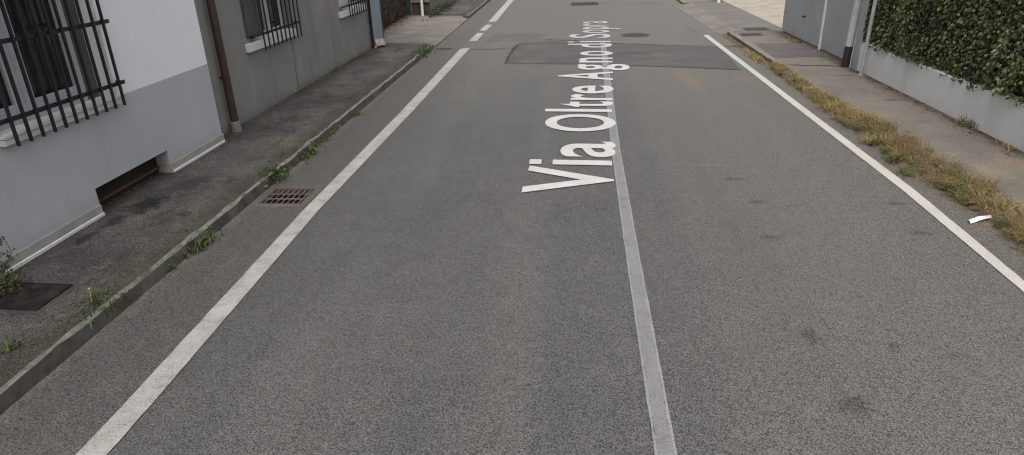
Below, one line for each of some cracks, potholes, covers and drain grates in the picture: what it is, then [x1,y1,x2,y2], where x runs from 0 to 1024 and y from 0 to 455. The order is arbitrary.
drain grate [258,189,316,204]
manhole cover [0,282,73,311]
